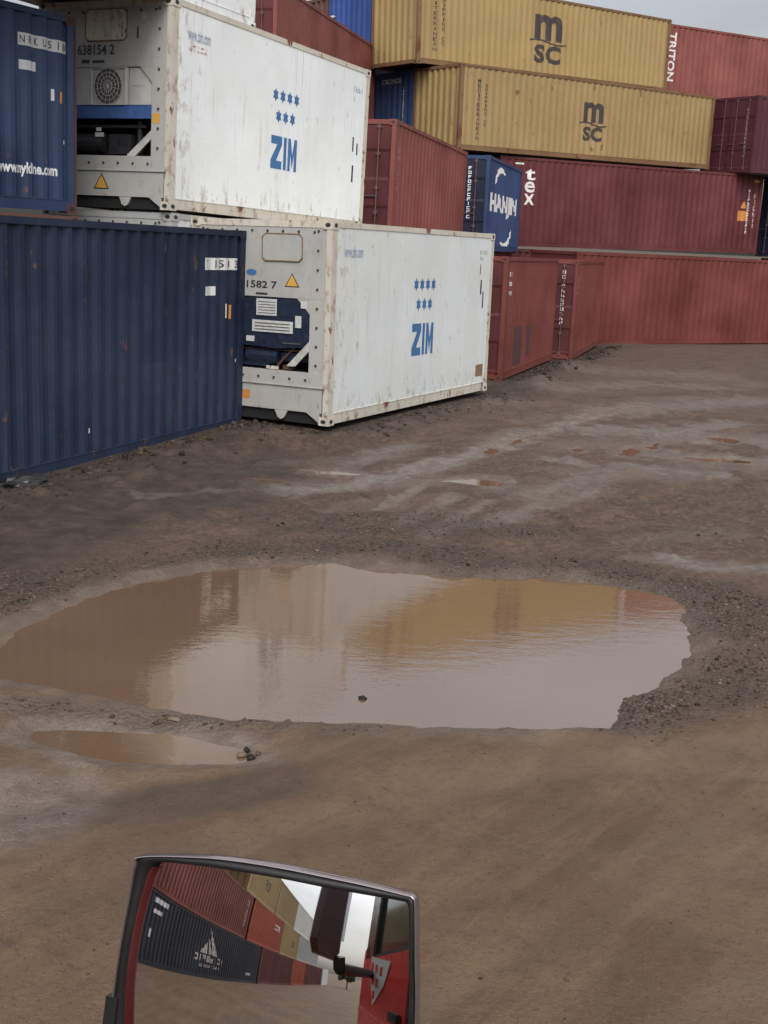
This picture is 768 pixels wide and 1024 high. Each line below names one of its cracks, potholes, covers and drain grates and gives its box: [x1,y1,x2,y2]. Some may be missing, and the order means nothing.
pothole [610,445,649,457]
pothole [432,475,517,488]
pothole [698,434,752,445]
pothole [0,555,714,736]
pothole [0,710,291,775]
pothole [473,446,510,456]
pothole [671,454,761,465]
